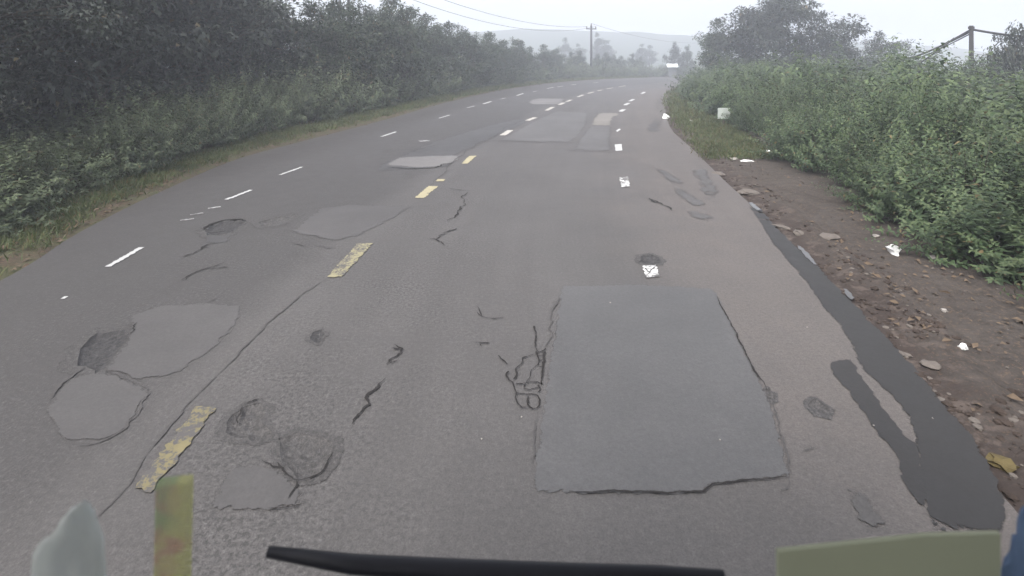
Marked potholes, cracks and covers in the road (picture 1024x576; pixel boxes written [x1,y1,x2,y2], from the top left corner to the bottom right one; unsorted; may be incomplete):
crack [475,295,560,458]
pothole [196,217,254,238]
pothole [803,396,835,420]
crack [262,453,332,509]
pothole [634,252,666,266]
crack [431,188,473,245]
pothole [211,398,279,447]
pothole [271,427,344,487]
pothole [56,324,132,377]
crack [352,344,403,424]
